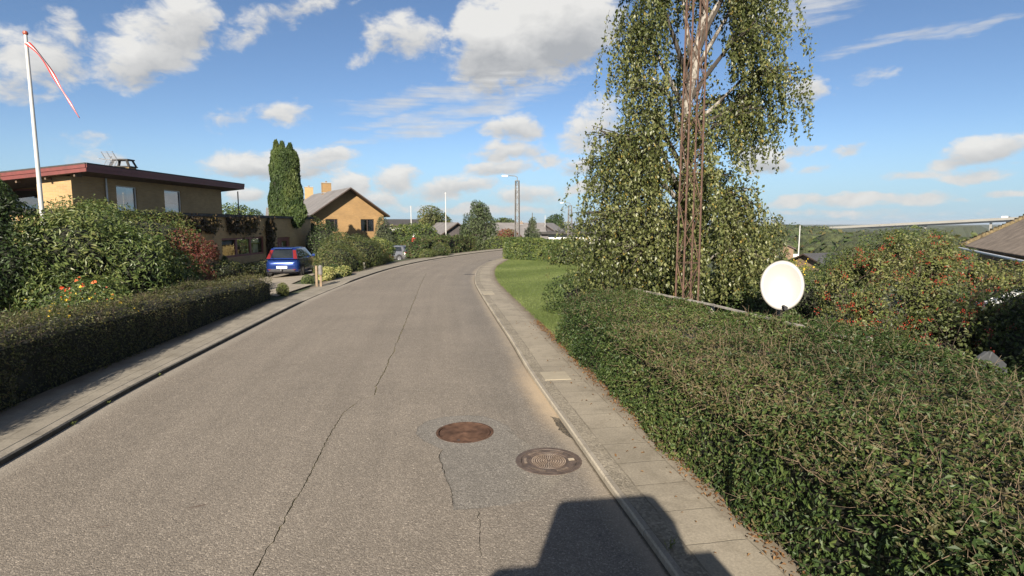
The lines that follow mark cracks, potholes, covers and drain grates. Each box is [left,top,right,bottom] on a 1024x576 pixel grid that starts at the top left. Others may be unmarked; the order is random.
manhole cover [516,447,582,475]
manhole cover [436,422,494,443]
crack [253,274,426,576]
